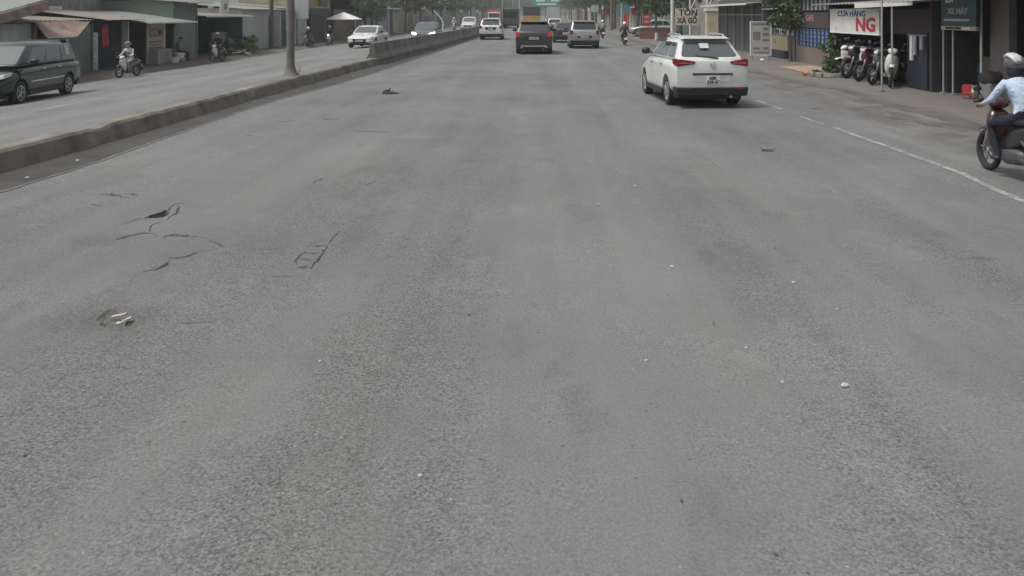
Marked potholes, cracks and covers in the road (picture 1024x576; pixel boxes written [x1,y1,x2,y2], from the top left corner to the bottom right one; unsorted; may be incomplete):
pothole [96,308,138,328]
pothole [145,210,170,218]
crack [116,203,339,278]
crack [91,193,138,206]
